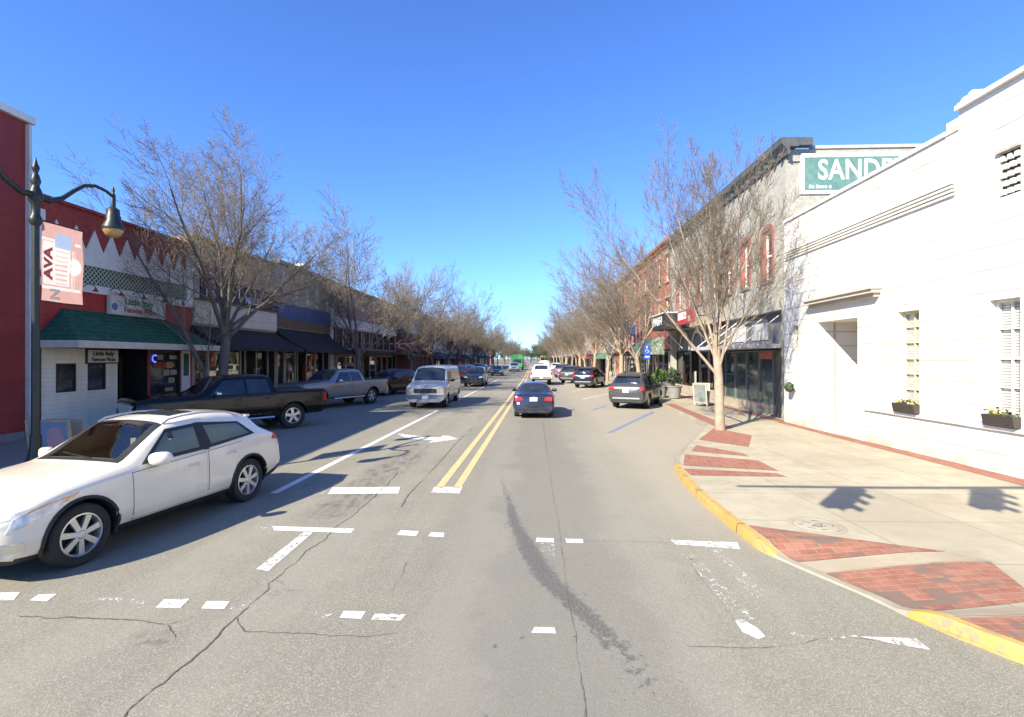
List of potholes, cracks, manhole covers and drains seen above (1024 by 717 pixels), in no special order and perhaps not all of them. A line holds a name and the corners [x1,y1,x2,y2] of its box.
crack [18,427,474,717]
manhole cover [786,517,848,535]
crack [688,638,879,648]
